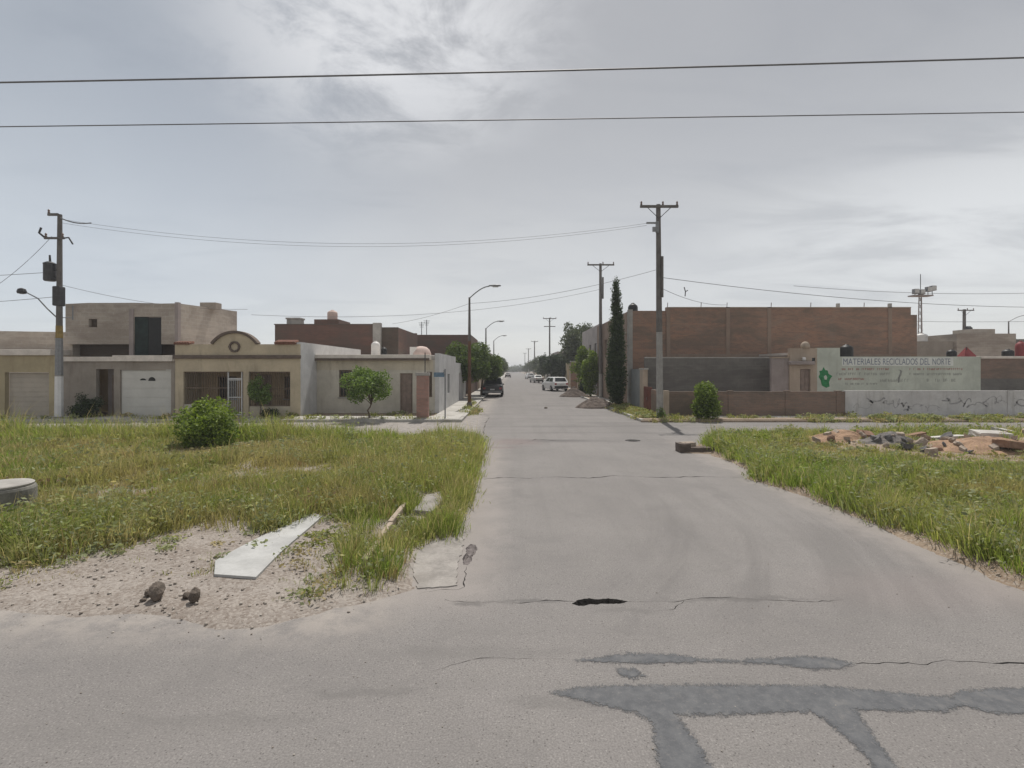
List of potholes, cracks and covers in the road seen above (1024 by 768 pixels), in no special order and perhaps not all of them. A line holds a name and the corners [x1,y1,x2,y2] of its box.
pothole [572,598,628,606]
